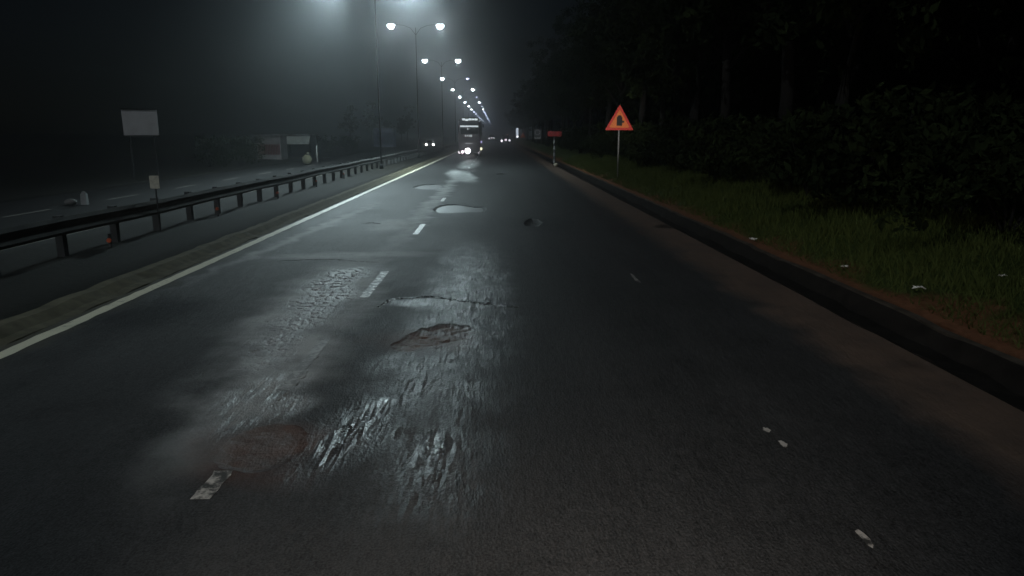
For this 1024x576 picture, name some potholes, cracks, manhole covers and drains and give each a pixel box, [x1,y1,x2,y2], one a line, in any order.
pothole [524,218,543,227]
pothole [389,323,477,353]
pothole [432,204,487,213]
crack [219,259,521,474]
